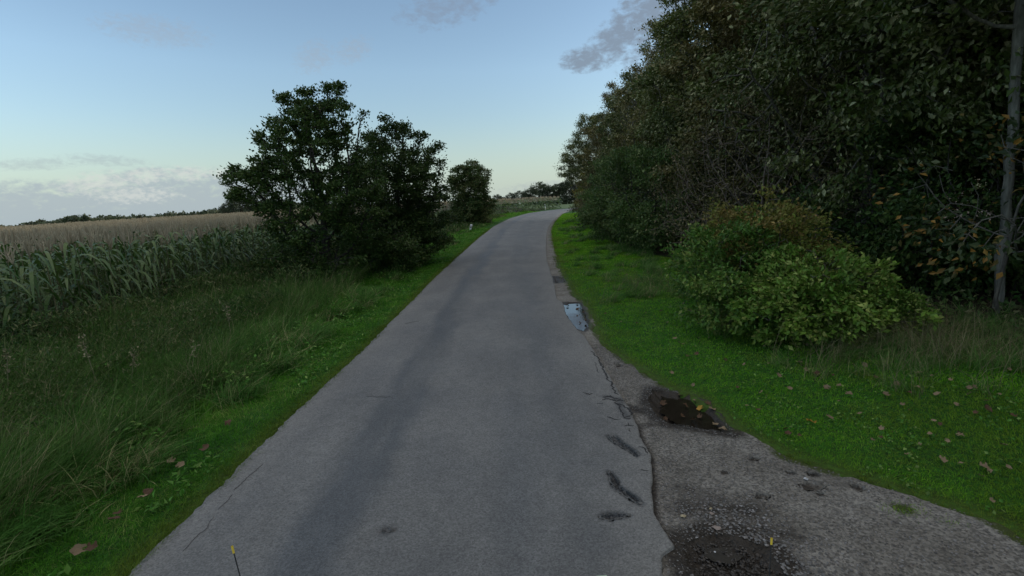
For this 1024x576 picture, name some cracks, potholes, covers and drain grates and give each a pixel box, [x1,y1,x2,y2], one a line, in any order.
pothole [605,434,640,458]
crack [183,466,260,551]
pothole [676,527,795,576]
pothole [599,512,629,522]
pothole [643,386,739,435]
crack [583,351,648,471]
pothole [607,470,643,506]
